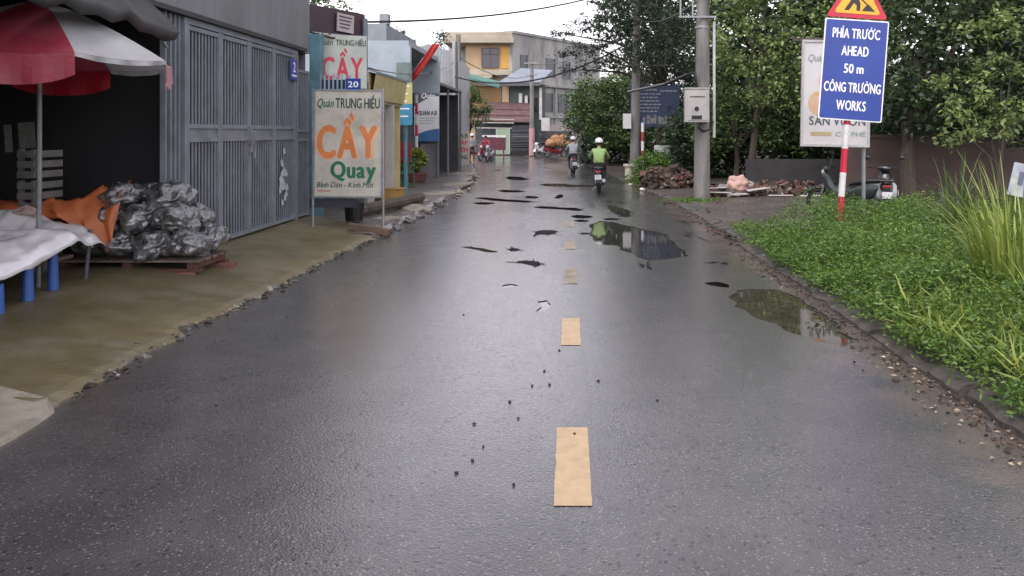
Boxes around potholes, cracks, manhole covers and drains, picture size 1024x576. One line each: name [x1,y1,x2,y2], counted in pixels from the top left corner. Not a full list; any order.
pothole [608,206,635,217]
pothole [589,221,688,261]
